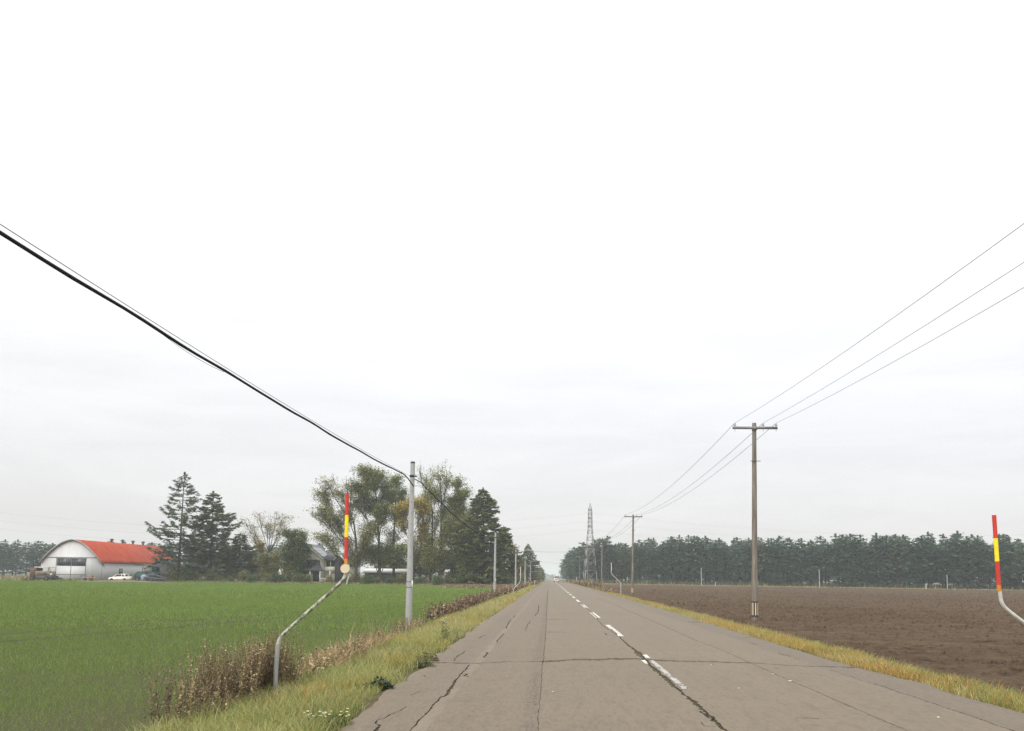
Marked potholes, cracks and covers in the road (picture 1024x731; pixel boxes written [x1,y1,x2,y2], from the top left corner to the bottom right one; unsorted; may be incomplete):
crack [373,603,1014,731]
